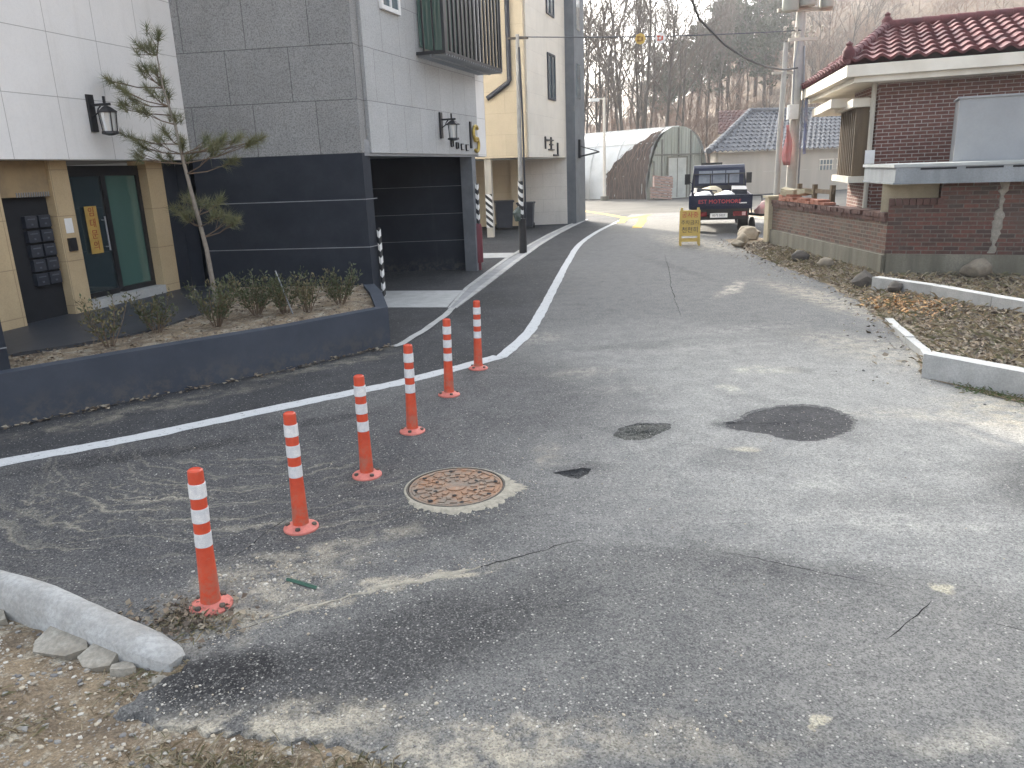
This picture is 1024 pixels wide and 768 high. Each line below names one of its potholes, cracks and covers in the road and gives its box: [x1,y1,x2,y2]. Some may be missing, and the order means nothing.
manhole cover [404,467,528,515]
pothole [554,468,591,479]
crack [212,519,580,640]
crack [886,603,930,640]
crack [730,553,900,589]
